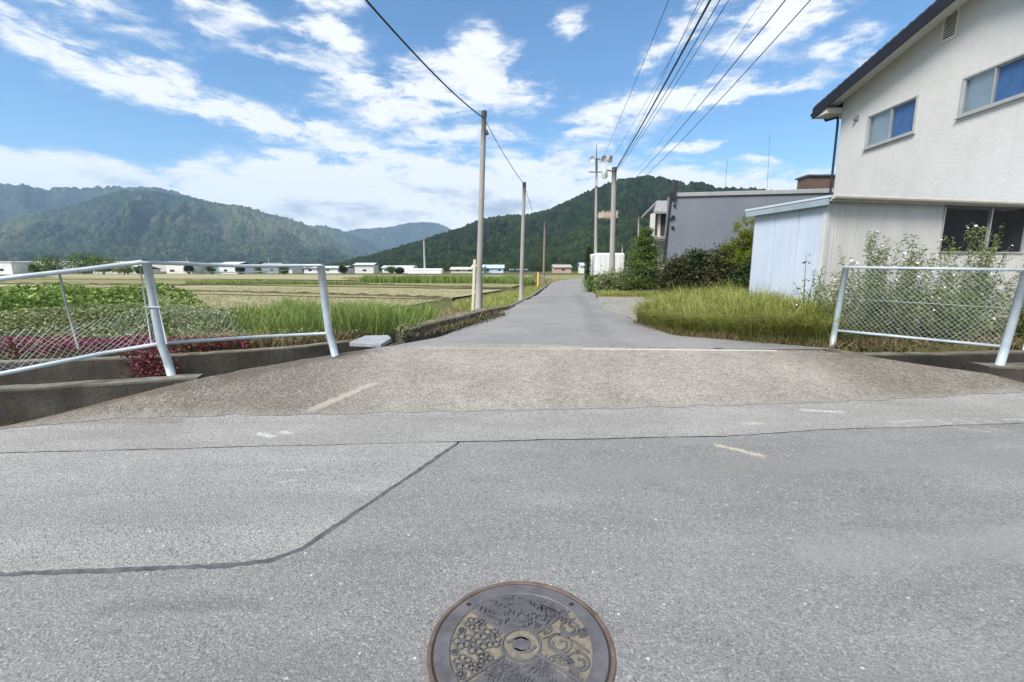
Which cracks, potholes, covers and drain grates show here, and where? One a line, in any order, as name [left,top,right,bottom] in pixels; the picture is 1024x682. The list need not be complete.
manhole cover [427,581,616,682]
